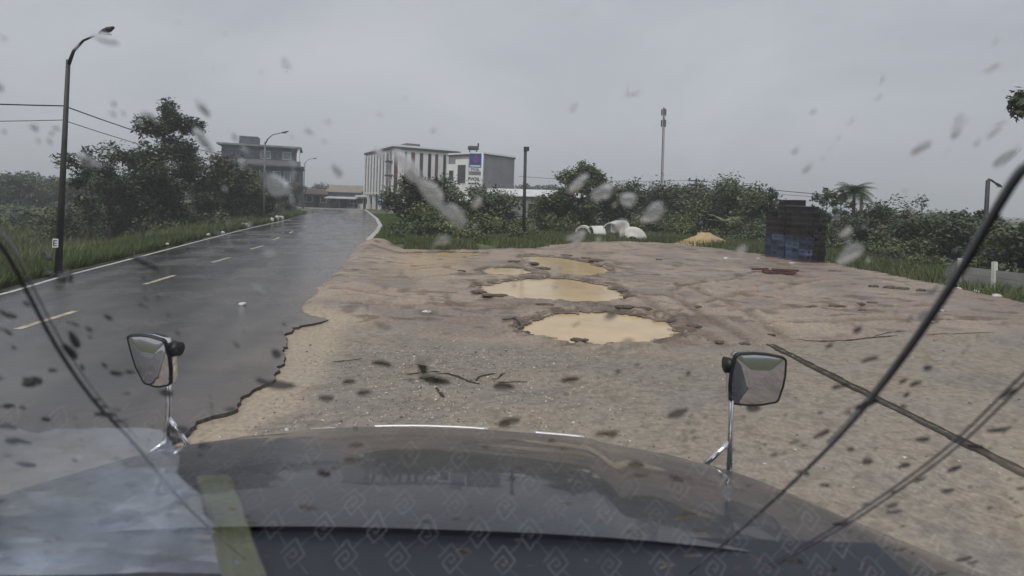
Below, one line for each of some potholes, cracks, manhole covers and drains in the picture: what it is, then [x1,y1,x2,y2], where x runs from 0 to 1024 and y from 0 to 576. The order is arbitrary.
pothole [508,306,700,346]
pothole [514,253,618,276]
crack [409,371,528,397]
pothole [467,274,639,304]
crack [766,331,1024,477]
pothole [472,265,540,275]
